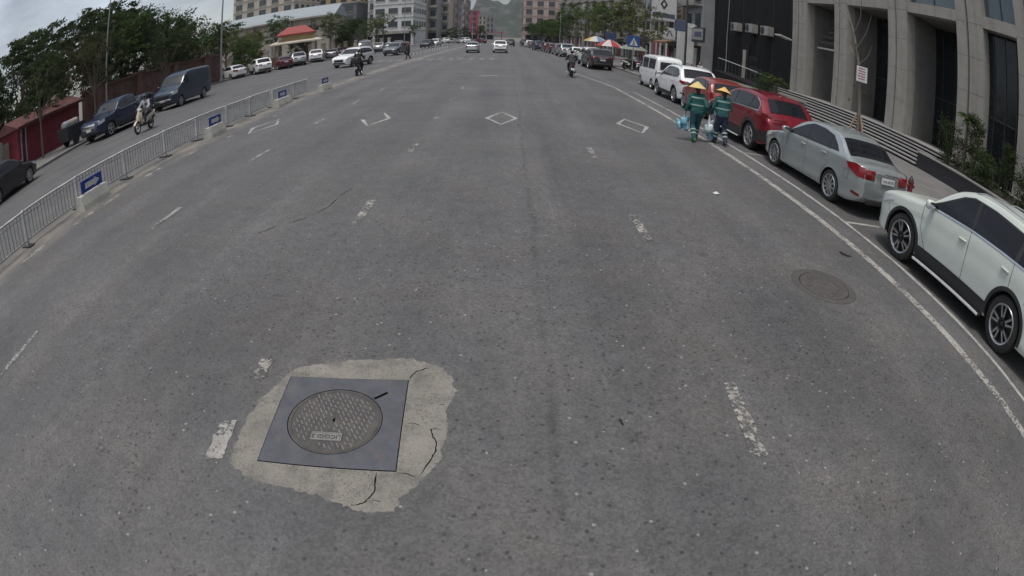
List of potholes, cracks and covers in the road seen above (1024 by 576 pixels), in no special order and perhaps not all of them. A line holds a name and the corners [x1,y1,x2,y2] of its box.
crack [352,472,382,506]
crack [401,423,442,477]
manhole cover [791,269,856,304]
